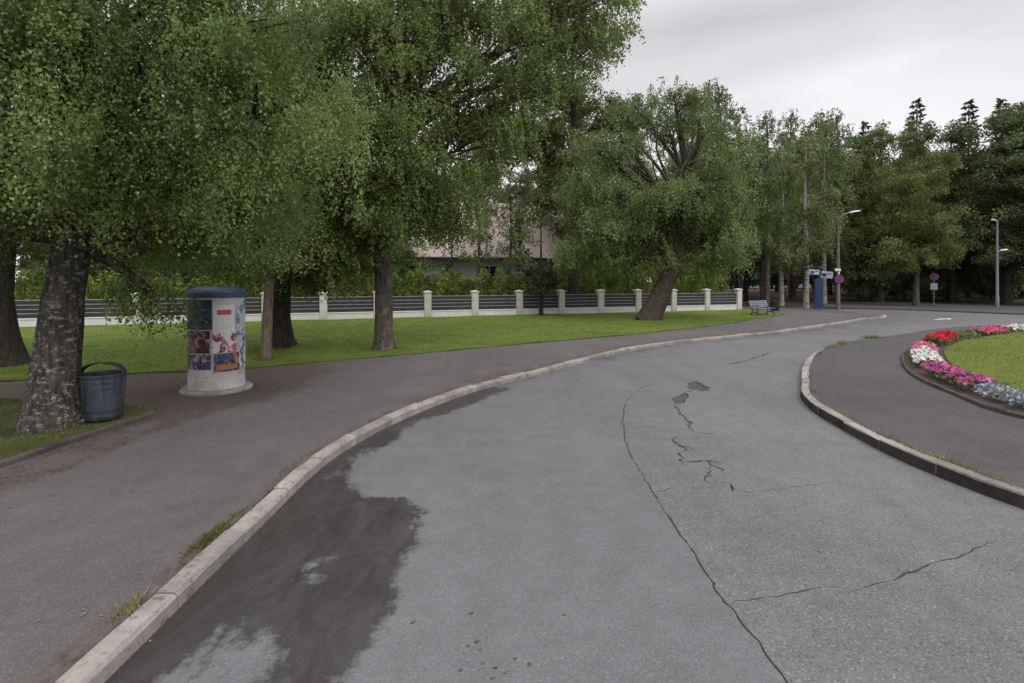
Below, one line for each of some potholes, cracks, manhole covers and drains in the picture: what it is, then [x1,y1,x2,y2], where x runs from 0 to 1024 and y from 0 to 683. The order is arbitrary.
crack [627,390,829,492]
crack [729,539,999,605]
pothole [672,393,689,404]
pothole [686,381,710,391]
